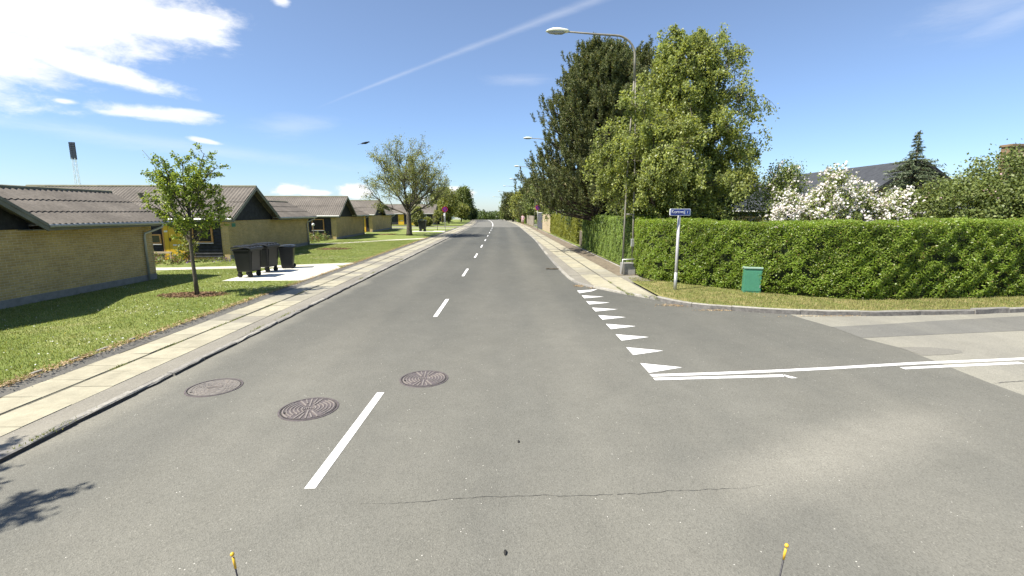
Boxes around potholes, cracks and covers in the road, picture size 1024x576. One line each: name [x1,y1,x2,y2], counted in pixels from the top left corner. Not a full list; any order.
manhole cover [184,378,244,397]
crack [336,486,752,504]
manhole cover [277,397,339,421]
